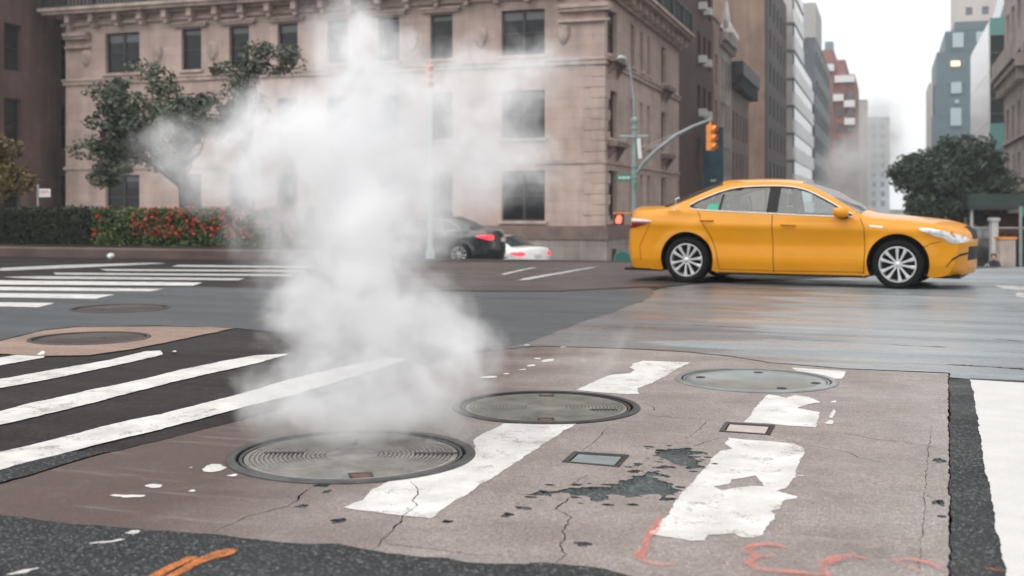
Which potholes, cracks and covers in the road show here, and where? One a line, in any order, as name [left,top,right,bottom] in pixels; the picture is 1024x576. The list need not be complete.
utility cover [562,451,629,467]
manhole cover [26,331,151,345]
utility cover [719,422,775,435]
manhole cover [452,390,640,424]
manhole cover [225,429,475,487]
crack [371,484,494,556]
manhole cover [68,304,171,313]
crack [555,475,587,563]
manhole cover [675,368,839,393]
crack [211,486,314,533]
